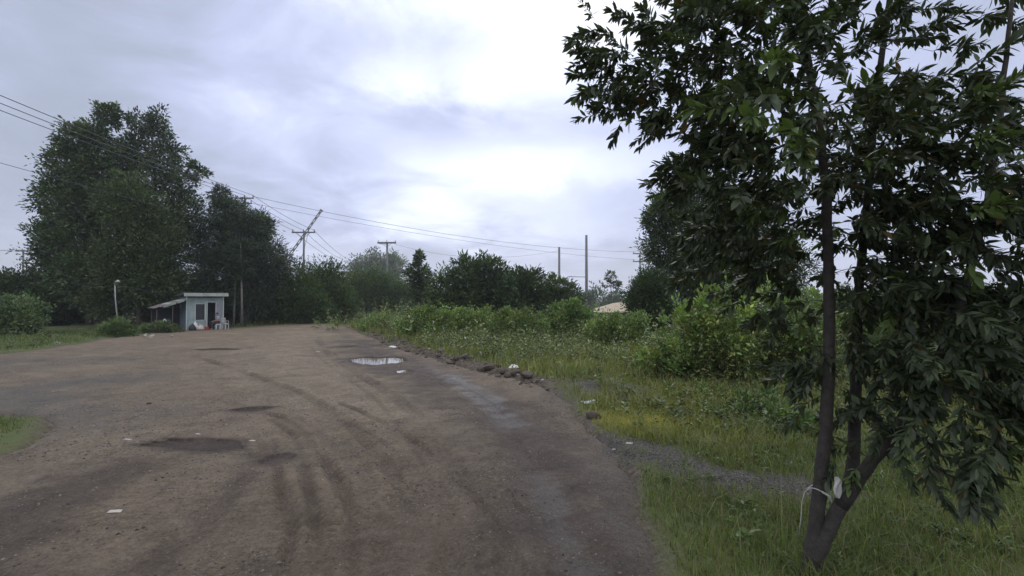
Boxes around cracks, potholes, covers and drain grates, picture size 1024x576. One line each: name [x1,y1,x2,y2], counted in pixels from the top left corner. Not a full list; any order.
pothole [136,437,248,453]
pothole [346,356,409,365]
pothole [253,451,302,466]
